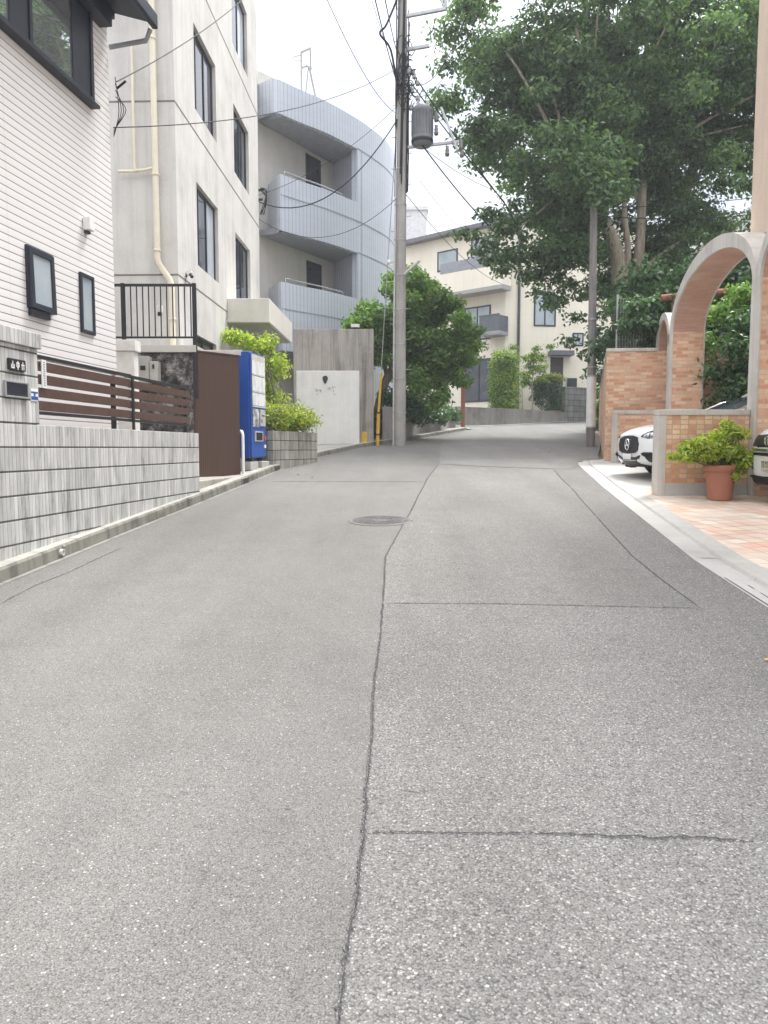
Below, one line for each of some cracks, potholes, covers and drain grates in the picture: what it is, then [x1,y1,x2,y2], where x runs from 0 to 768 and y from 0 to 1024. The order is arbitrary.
manhole cover [348,515,412,526]
